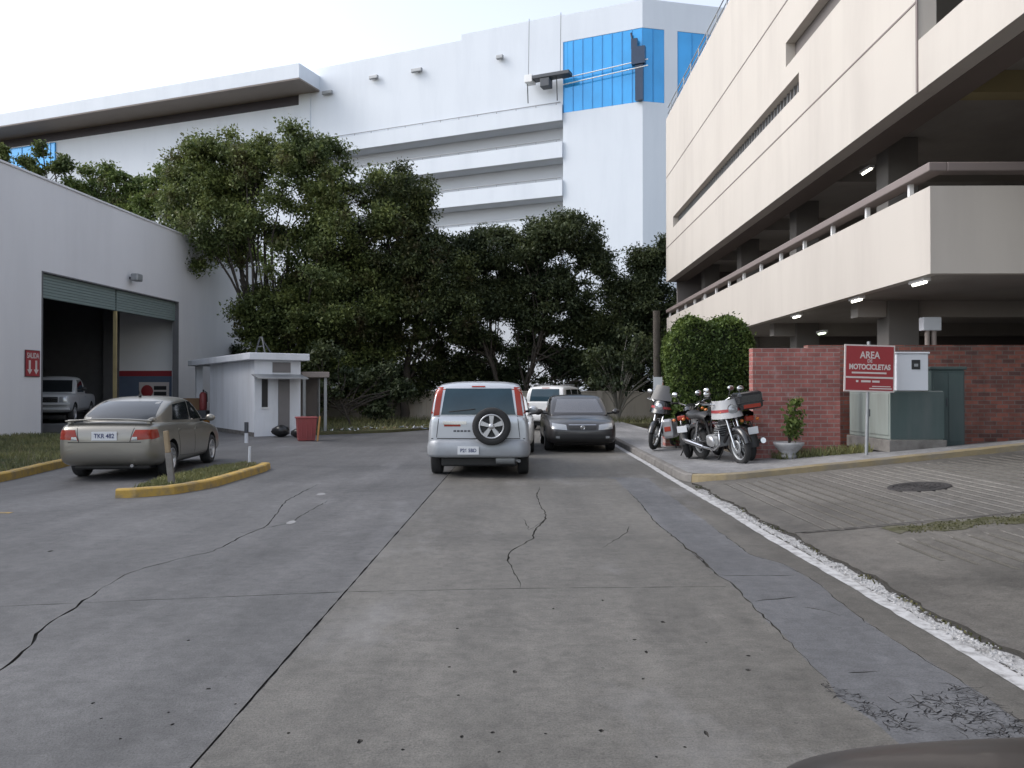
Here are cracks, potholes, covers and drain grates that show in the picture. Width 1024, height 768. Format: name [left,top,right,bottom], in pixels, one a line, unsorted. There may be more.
crack [606,488,1024,739]
crack [0,485,323,671]
crack [507,487,547,586]
manhole cover [887,482,952,492]
